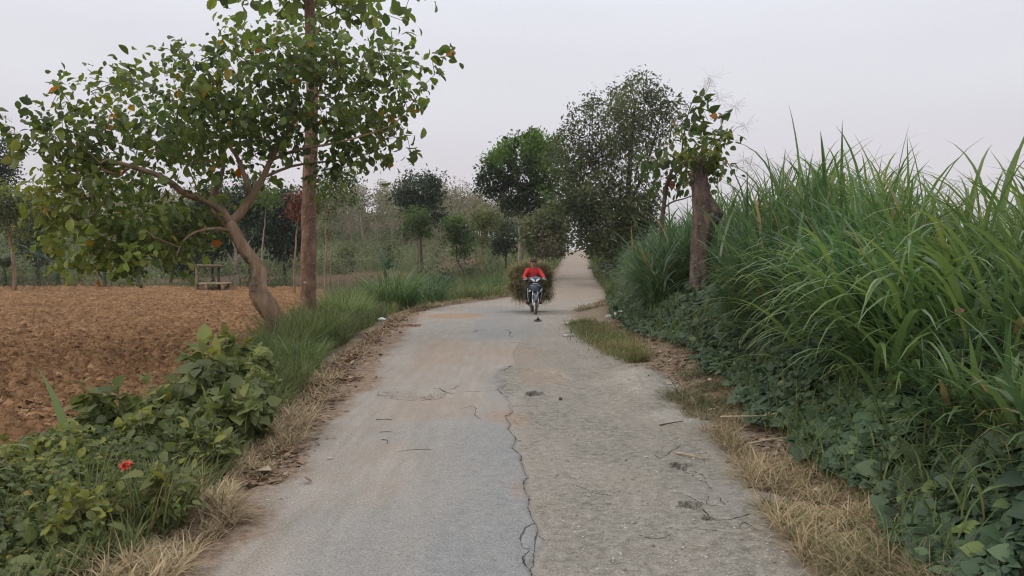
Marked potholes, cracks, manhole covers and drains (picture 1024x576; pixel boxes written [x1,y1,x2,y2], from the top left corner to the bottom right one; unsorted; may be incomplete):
crack [685,472,757,532]
pothole [669,461,694,471]
pothole [676,500,703,510]
crack [505,405,544,576]
